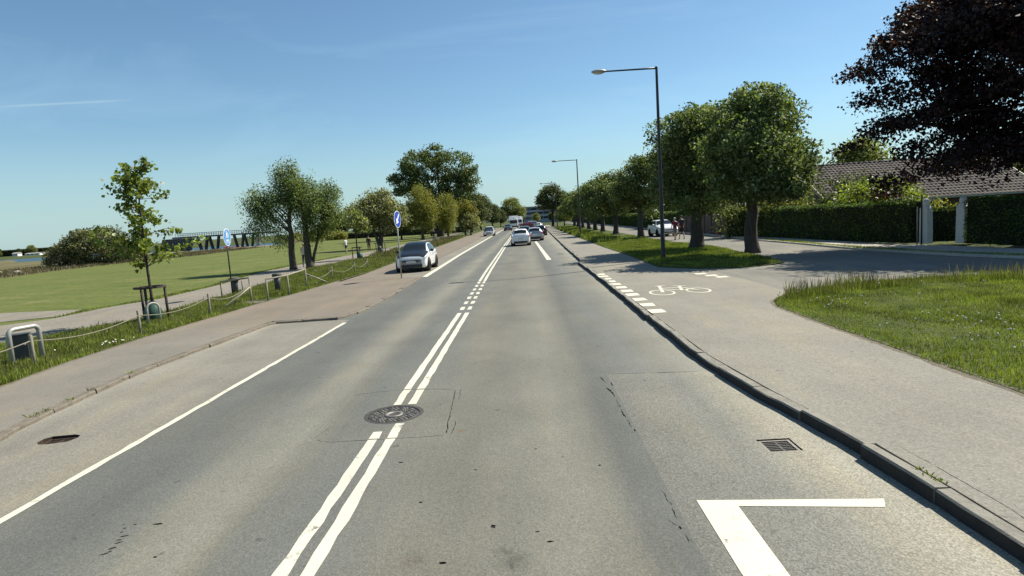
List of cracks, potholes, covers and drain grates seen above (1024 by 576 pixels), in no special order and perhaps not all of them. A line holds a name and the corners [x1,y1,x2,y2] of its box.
drain grate [756,438,803,452]
manhole cover [364,405,424,424]
